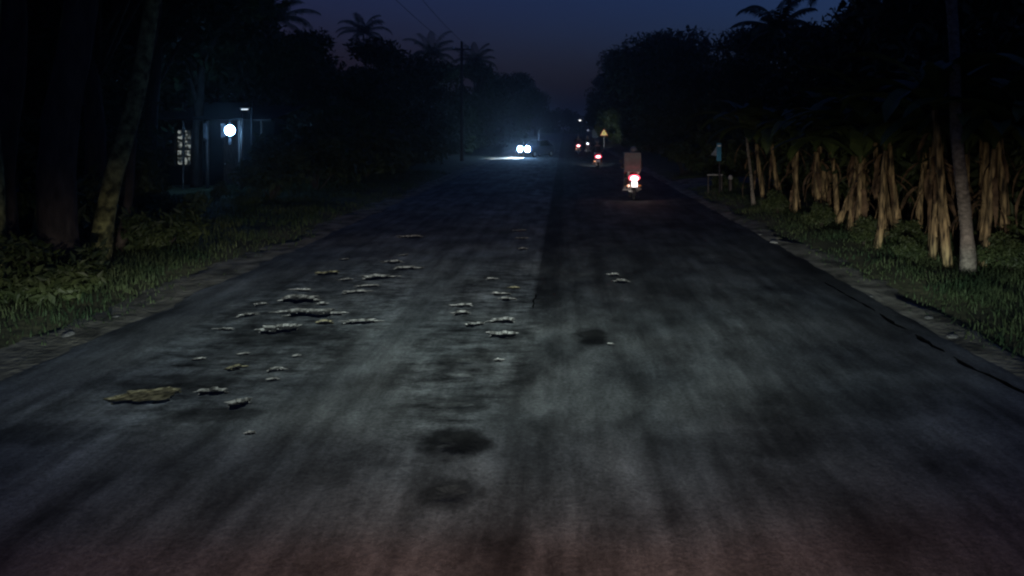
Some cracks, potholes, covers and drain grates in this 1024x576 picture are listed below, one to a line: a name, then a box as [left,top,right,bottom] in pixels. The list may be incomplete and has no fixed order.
pothole [254,323,302,335]
pothole [223,364,248,372]
pothole [224,397,253,410]
pothole [277,294,321,304]
pothole [269,308,348,318]
pothole [485,330,519,339]
pothole [193,387,230,396]
